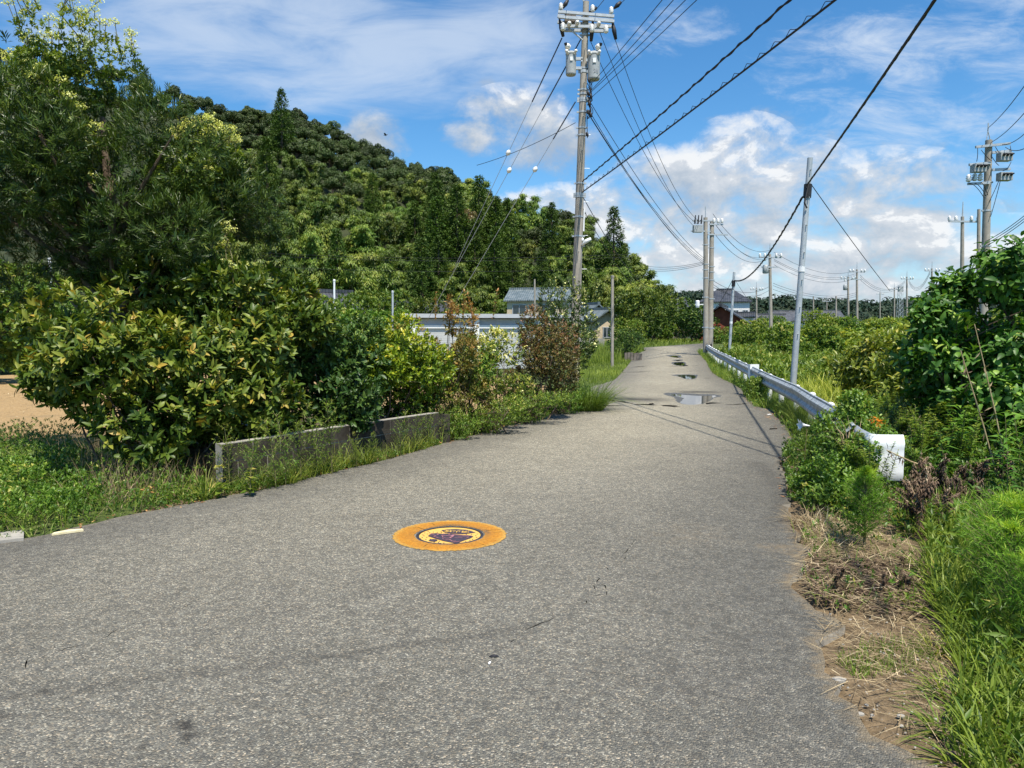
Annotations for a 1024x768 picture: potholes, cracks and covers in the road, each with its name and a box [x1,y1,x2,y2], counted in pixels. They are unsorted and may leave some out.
manhole cover [416,526,484,544]
crack [510,539,636,643]
pothole [664,393,721,405]
